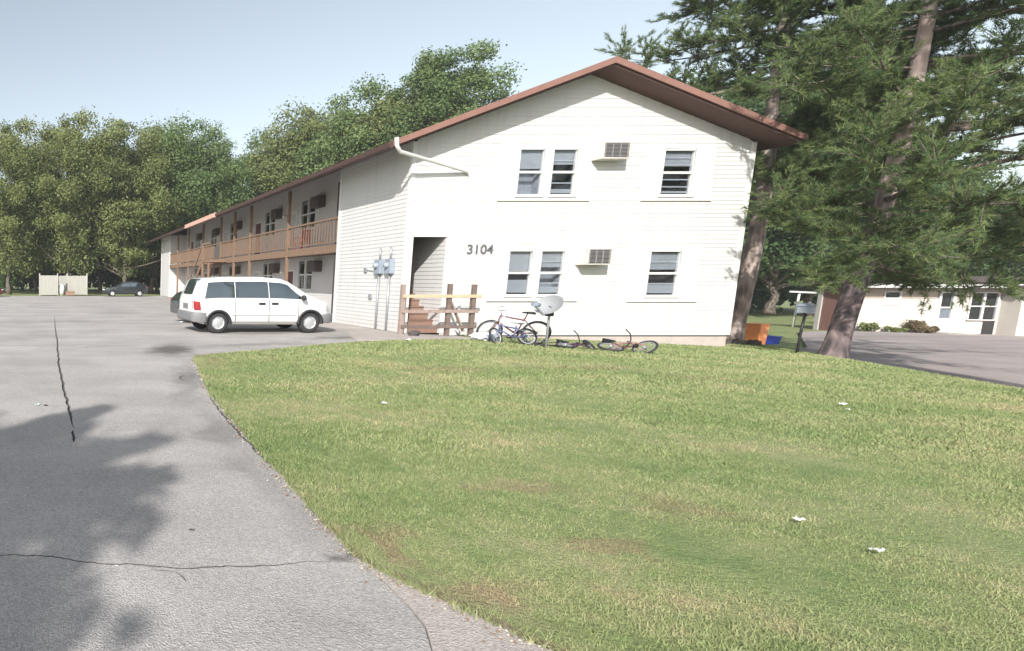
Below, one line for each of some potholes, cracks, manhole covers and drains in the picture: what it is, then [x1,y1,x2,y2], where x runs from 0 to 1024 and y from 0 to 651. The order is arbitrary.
crack [20,317,148,442]
crack [0,554,334,582]
